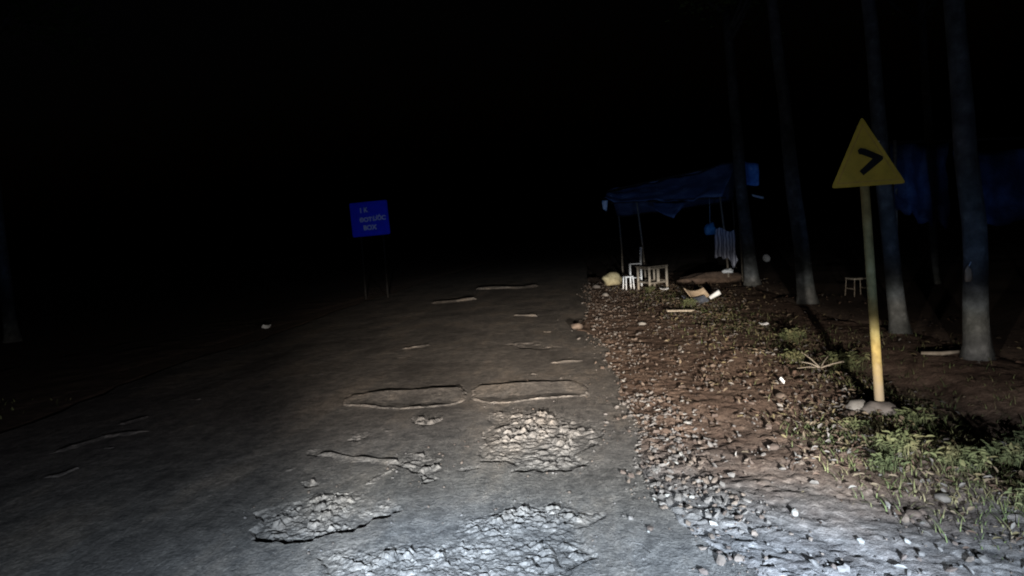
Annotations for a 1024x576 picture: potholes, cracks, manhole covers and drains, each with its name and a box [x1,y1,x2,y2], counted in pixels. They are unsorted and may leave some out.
pothole [476,409,605,473]
crack [317,452,400,485]
pothole [248,490,403,545]
pothole [408,417,444,427]
crack [44,416,150,478]
pothole [314,501,610,576]
